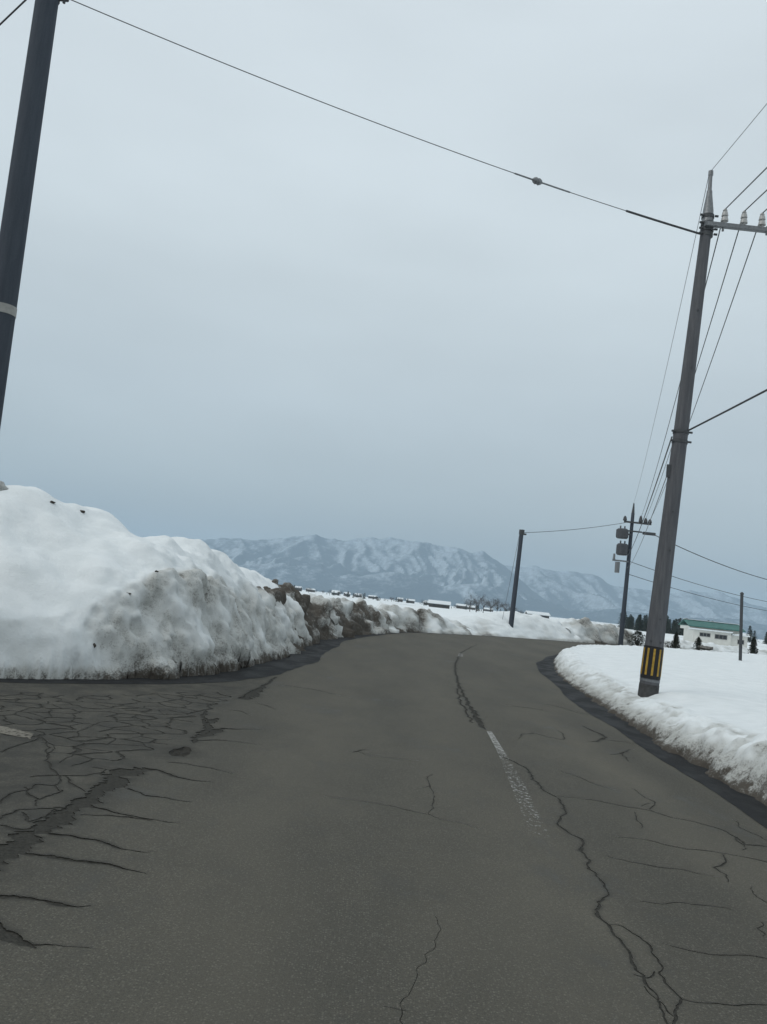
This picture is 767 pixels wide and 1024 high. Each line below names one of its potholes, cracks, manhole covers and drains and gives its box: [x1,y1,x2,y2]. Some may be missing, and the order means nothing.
crack [518,704,633,761]
crack [0,895,91,949]
pothole [169,747,192,757]
crack [0,677,328,873]
crack [325,775,442,820]
crack [499,754,767,1024]
crack [384,916,441,1024]
crack [454,646,485,729]
